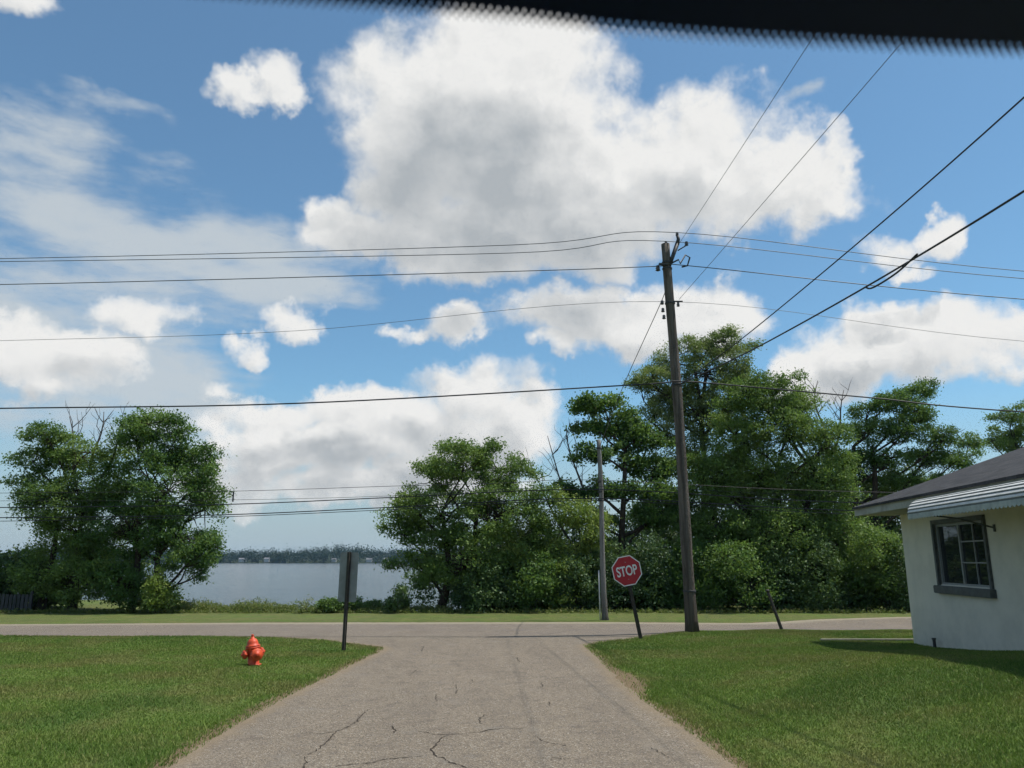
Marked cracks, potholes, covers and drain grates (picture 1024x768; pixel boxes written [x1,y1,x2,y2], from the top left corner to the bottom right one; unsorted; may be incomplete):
crack [303,710,368,768]
crack [338,714,520,768]
